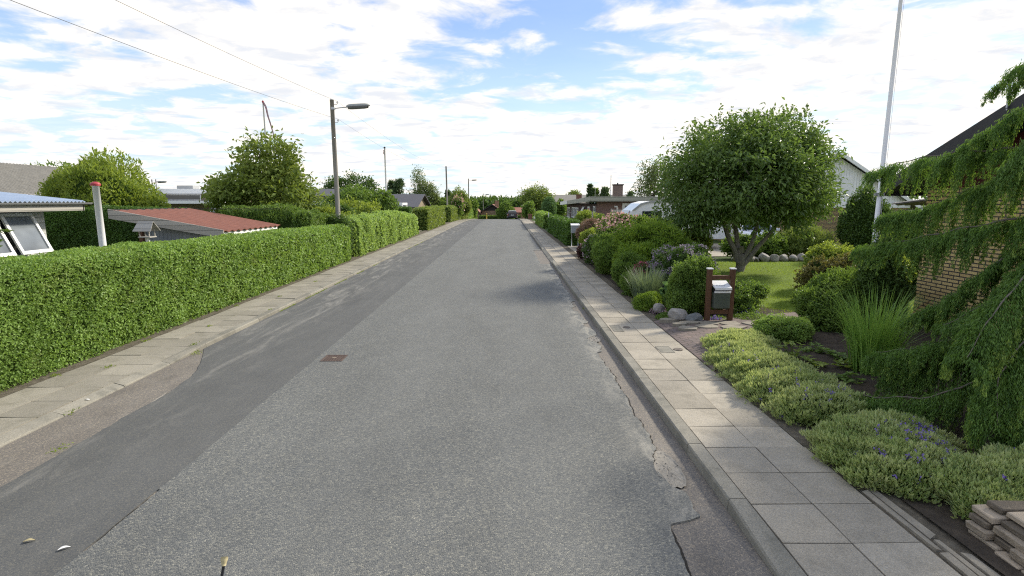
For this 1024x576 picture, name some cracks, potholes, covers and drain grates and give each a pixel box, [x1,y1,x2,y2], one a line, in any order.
crack [604,362,657,448]
